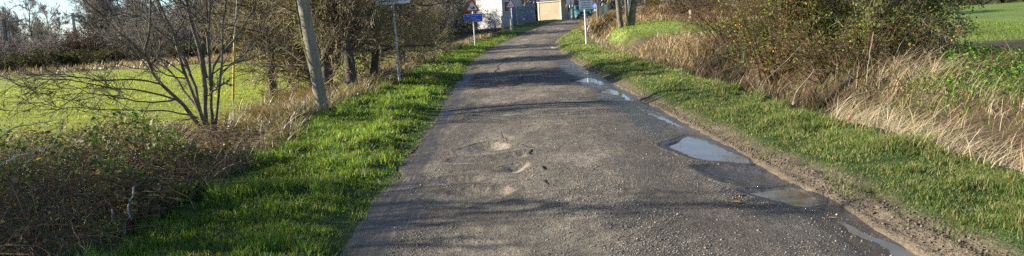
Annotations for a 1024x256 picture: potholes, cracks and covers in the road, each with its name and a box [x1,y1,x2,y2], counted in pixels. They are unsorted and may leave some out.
pothole [654,134,754,165]
pothole [449,140,520,155]
crack [494,56,532,81]
pothole [732,184,829,209]
pothole [445,160,538,175]
